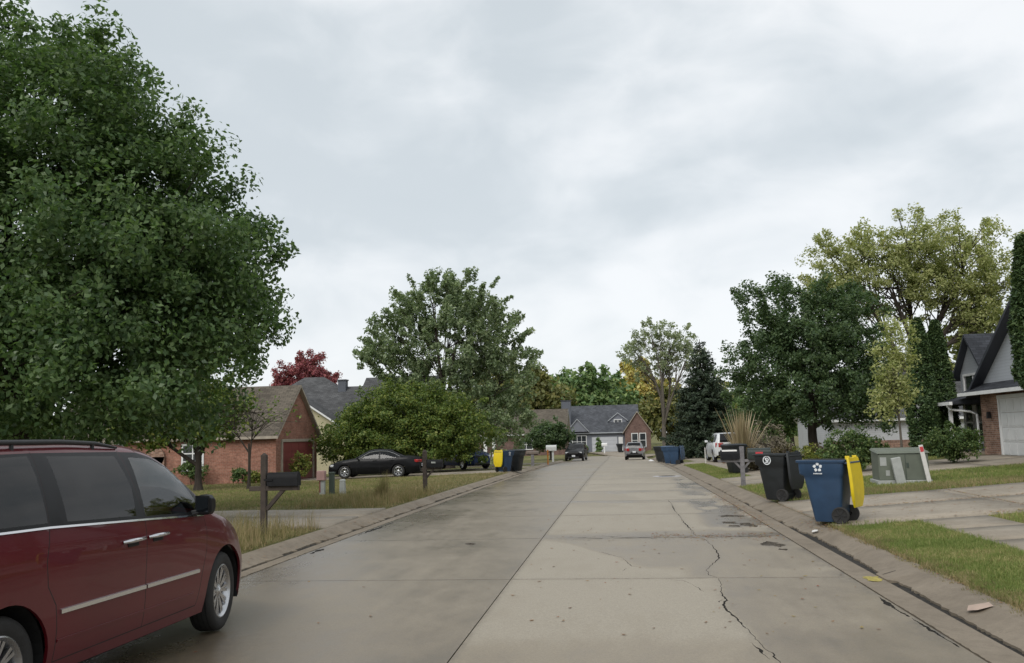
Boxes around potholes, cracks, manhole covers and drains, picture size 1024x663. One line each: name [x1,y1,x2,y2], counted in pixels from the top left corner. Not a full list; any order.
crack [578,501,781,663]
crack [709,484,1024,657]
